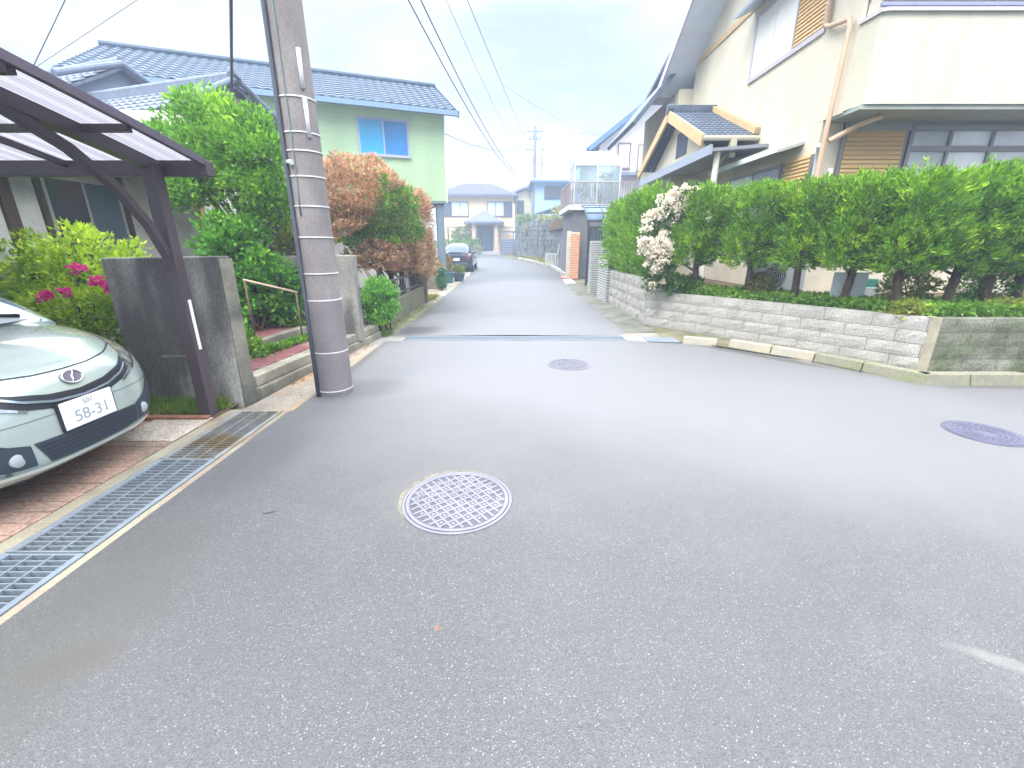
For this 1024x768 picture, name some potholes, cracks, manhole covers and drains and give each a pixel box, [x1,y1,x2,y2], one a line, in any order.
drain grate [5,459,216,554]
drain grate [0,553,86,617]
manhole cover [940,420,1024,447]
manhole cover [547,358,591,370]
drain grate [159,411,282,460]
manhole cover [402,472,512,535]
